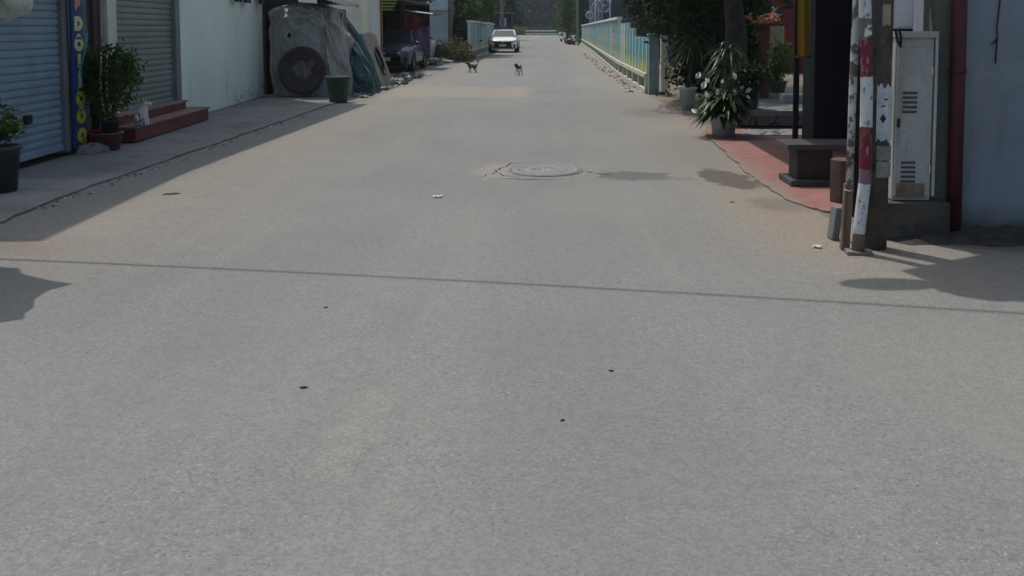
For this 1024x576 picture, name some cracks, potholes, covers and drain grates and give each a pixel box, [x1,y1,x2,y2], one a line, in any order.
crack [480,162,554,180]
manhole cover [508,164,583,177]
